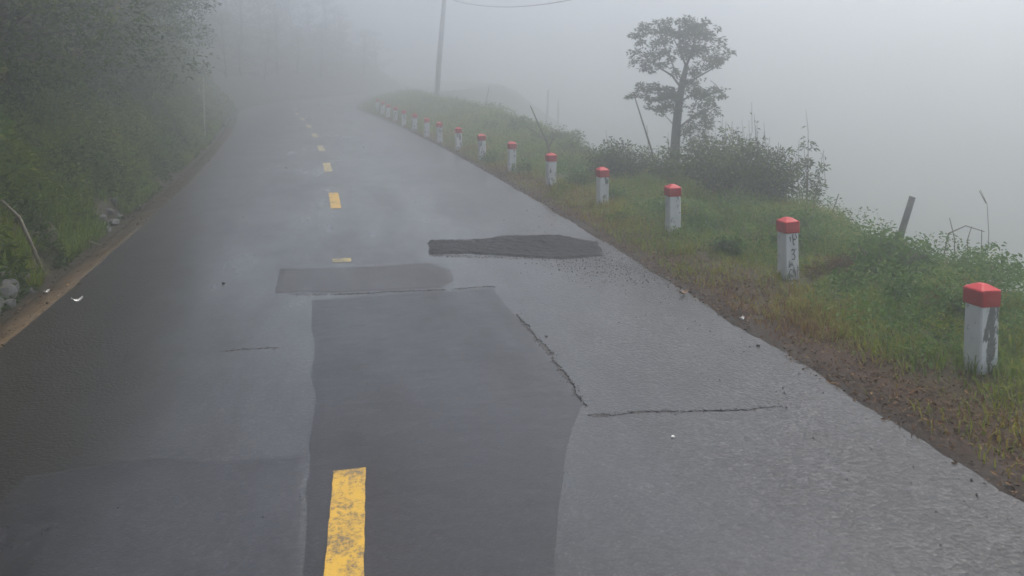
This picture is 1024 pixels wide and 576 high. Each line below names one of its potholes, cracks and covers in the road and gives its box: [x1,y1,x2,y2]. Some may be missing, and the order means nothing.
crack [515,313,788,418]
